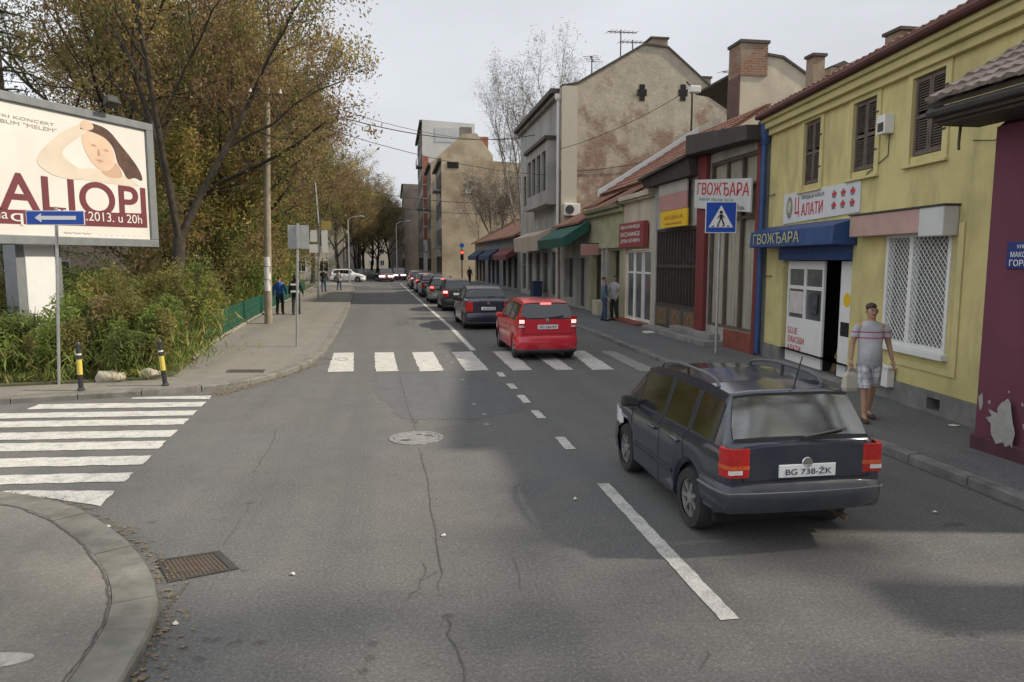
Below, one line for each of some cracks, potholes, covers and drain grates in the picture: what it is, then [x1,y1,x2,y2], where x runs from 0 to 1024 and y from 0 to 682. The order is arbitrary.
crack [406,450,466,682]
manhole cover [389,431,444,445]
drain grate [156,550,239,583]
